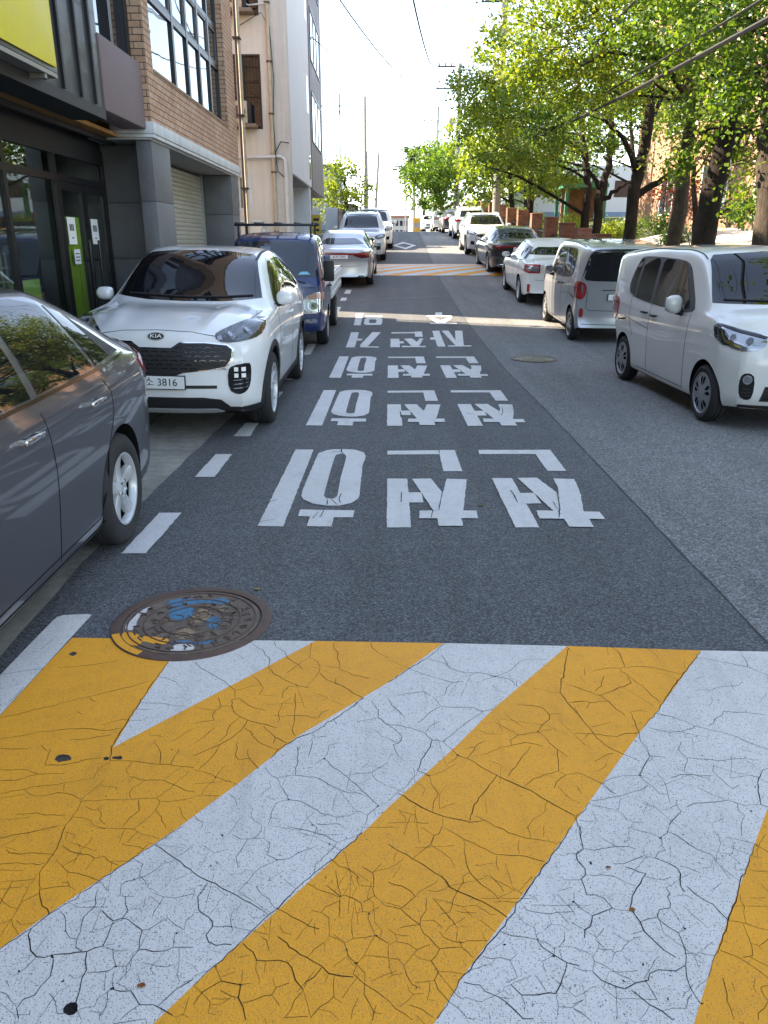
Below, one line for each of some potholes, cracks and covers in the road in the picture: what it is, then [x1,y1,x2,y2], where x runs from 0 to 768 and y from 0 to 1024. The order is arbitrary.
manhole cover [511,355,557,363]
manhole cover [110,587,272,661]
